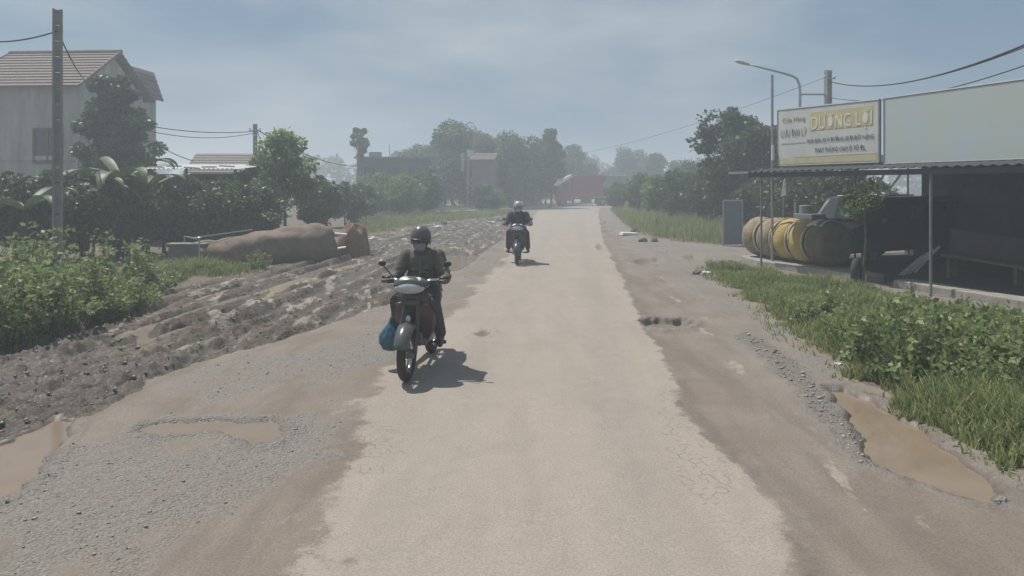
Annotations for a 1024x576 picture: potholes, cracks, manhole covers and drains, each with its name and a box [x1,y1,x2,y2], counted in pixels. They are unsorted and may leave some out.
pothole [626,257,670,267]
pothole [0,409,89,507]
crack [328,423,403,478]
crack [658,388,733,504]
pothole [468,328,496,339]
pothole [125,414,302,450]
pothole [813,381,1024,510]
pothole [633,315,701,333]
